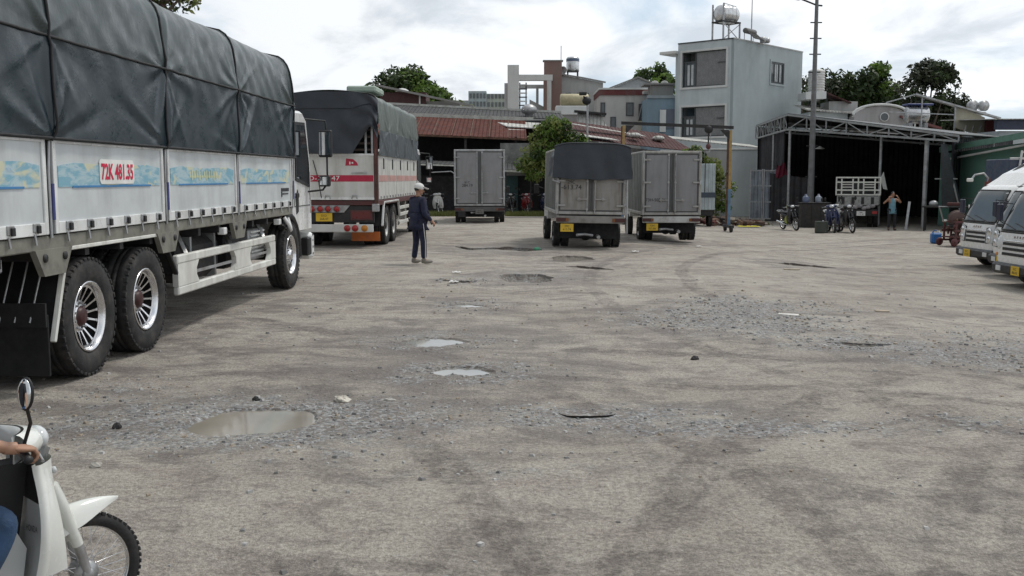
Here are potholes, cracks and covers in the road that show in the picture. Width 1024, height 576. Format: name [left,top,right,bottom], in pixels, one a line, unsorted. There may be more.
pothole [180,408,318,436]
pothole [499,274,554,283]
pothole [426,365,496,376]
pothole [400,337,471,347]
